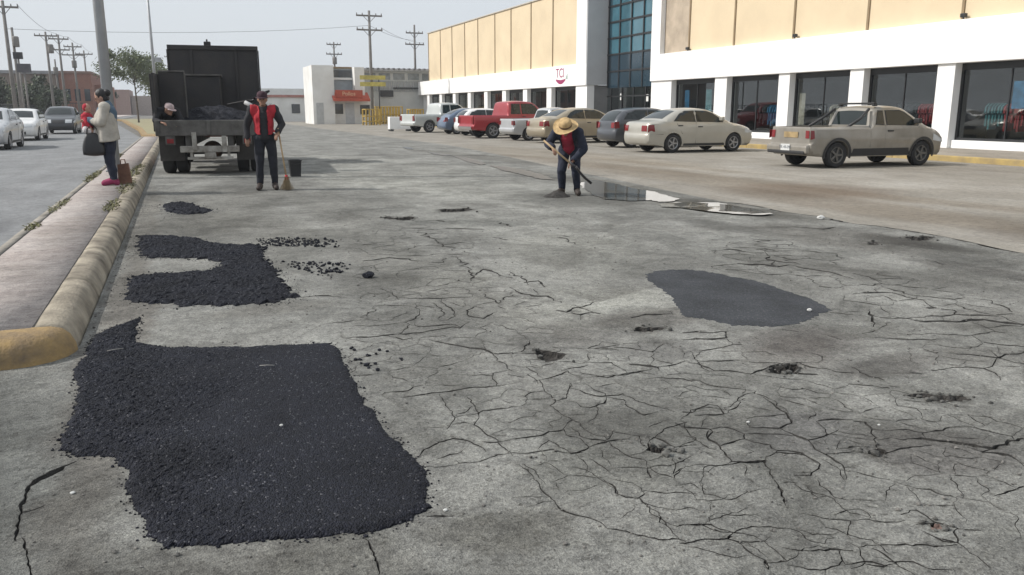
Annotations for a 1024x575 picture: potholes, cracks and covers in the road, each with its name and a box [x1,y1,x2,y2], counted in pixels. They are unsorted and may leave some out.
crack [327,278,1024,575]
pothole [907,393,969,402]
pothole [535,350,566,362]
crack [349,217,474,279]
crack [711,227,1024,380]
crack [14,461,77,575]
pothole [769,365,801,374]
